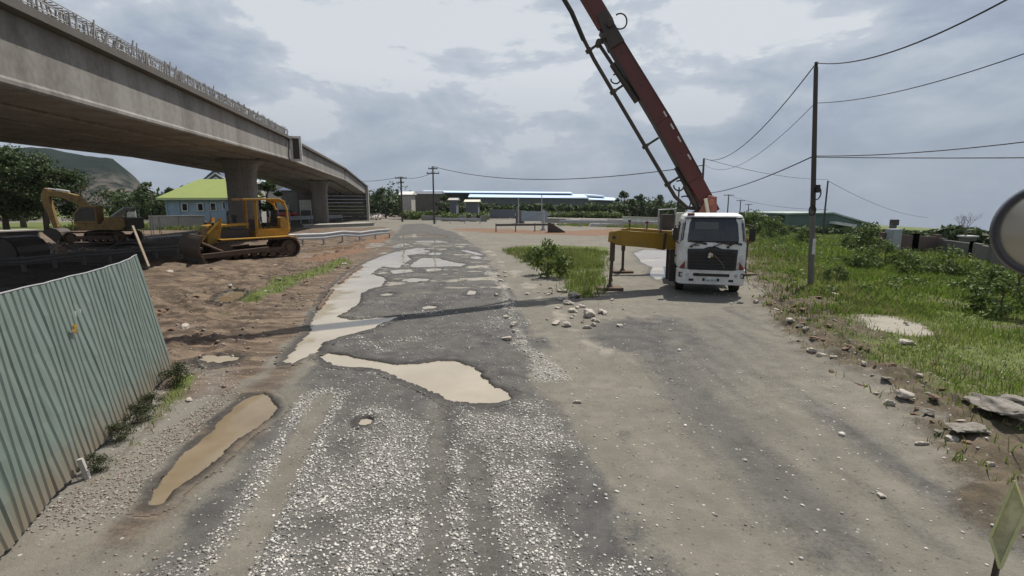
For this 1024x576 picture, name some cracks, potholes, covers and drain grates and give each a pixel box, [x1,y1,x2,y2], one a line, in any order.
pothole [402,257,475,268]
pothole [126,388,290,516]
pothole [309,350,523,409]
pothole [274,248,433,368]
pothole [349,413,381,429]
